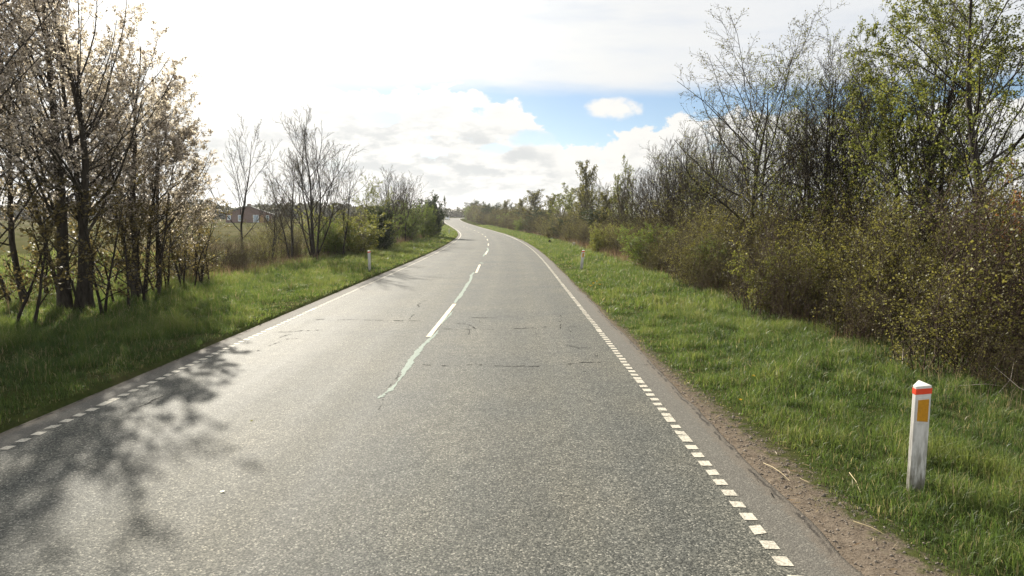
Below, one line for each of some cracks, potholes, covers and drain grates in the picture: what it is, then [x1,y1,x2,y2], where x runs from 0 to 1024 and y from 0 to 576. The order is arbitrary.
crack [422,315,649,374]
